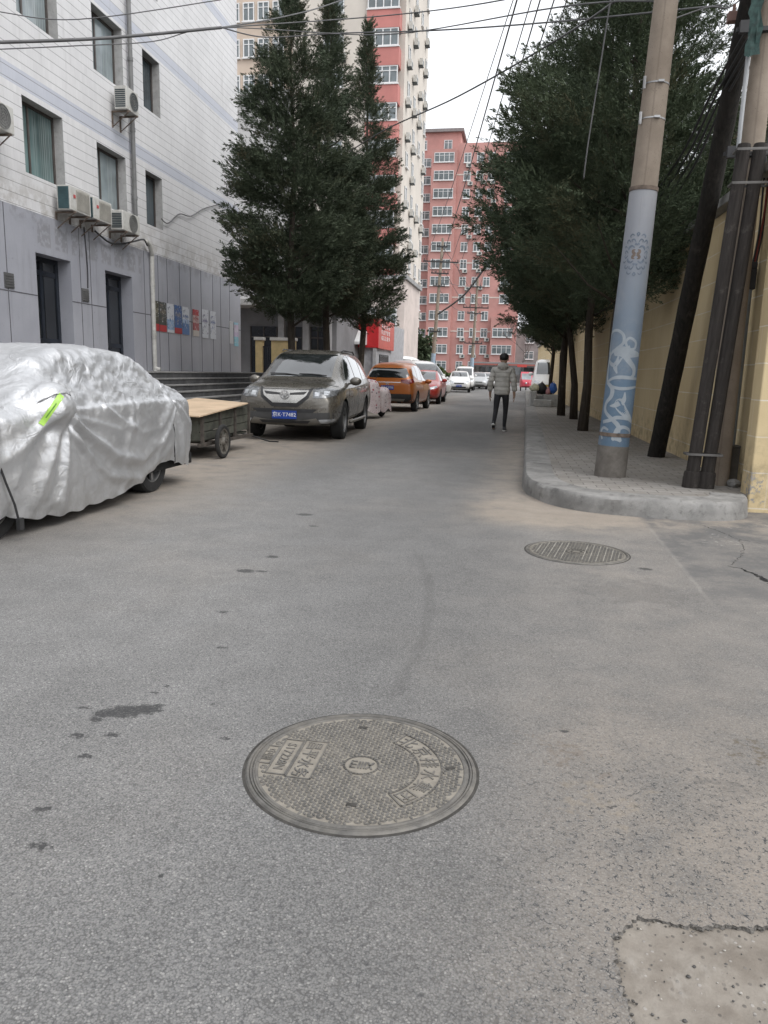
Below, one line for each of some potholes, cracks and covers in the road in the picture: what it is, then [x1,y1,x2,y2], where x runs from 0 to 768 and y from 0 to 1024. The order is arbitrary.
manhole cover [242,714,480,838]
crack [704,526,768,584]
manhole cover [524,540,631,565]
